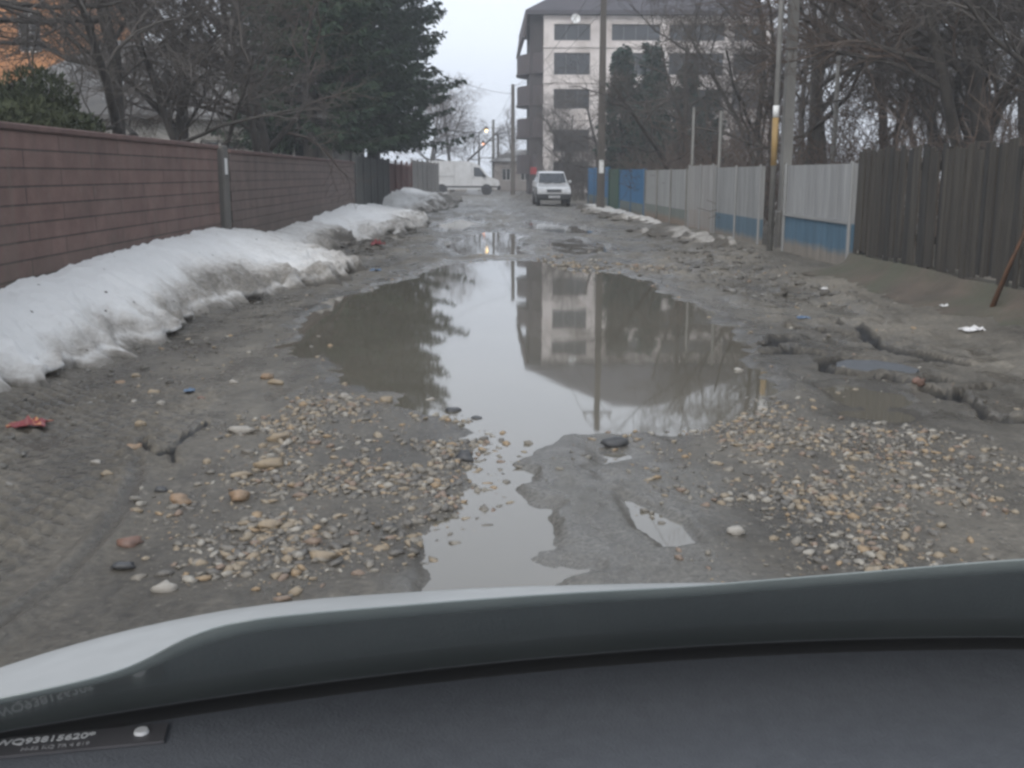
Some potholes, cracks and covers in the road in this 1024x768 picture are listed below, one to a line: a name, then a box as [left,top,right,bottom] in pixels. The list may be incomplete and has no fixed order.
pothole [266,257,796,592]
crack [136,421,208,463]
pothole [436,228,536,255]
